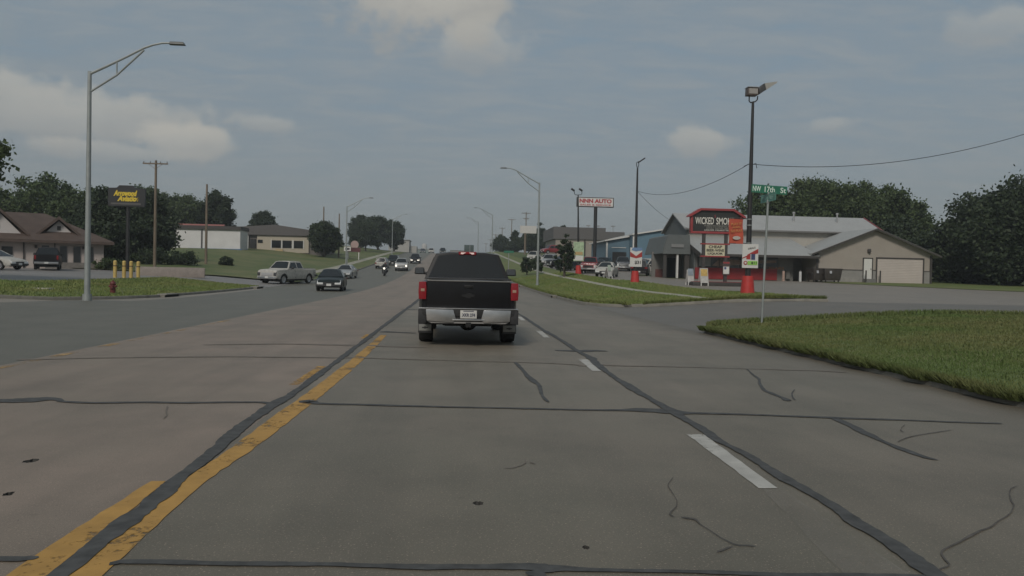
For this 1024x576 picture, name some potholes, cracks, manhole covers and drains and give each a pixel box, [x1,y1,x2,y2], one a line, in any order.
crack [668,479,755,552]
crack [939,486,1016,570]
